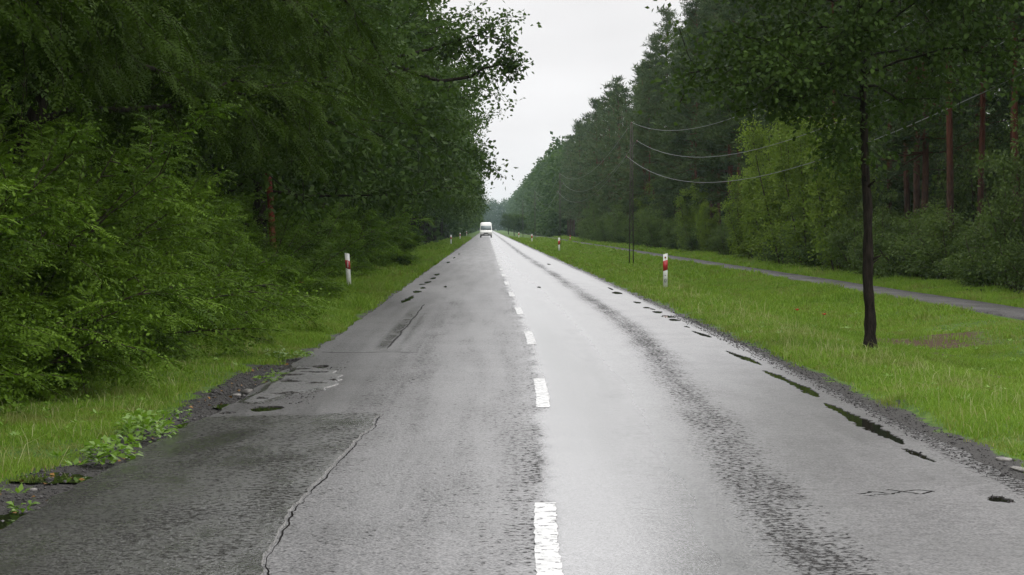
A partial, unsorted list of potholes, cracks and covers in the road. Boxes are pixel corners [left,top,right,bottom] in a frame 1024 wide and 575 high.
pothole [764,371,820,397]
crack [265,415,383,575]
pothole [726,351,762,365]
pothole [824,403,905,444]
pothole [902,449,936,462]
pothole [987,494,1015,503]
